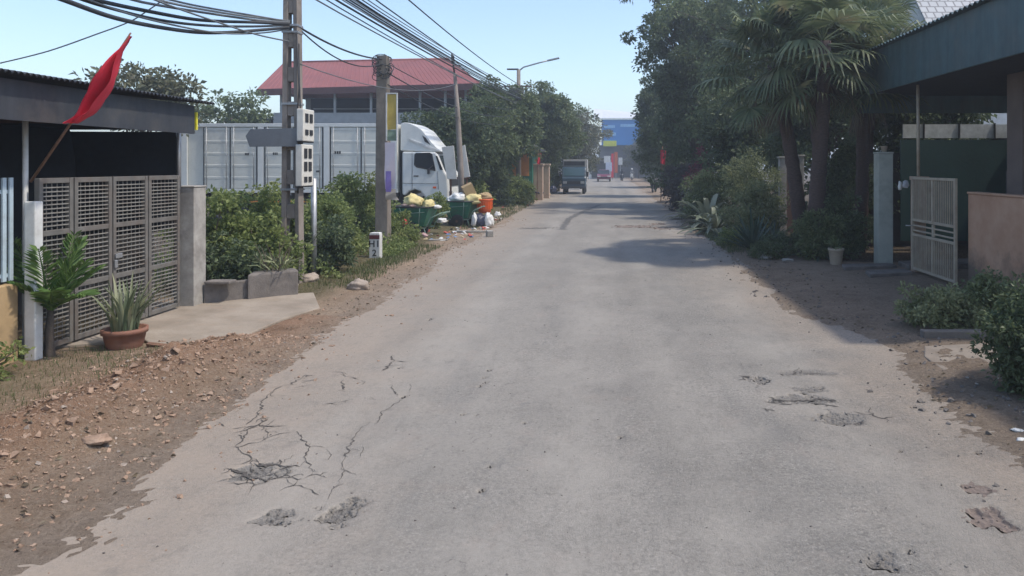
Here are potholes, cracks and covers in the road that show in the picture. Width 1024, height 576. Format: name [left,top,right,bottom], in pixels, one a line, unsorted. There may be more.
pothole [960,481,997,497]
pothole [811,409,869,427]
pothole [247,508,304,526]
pothole [220,462,292,487]
pothole [744,376,772,388]
crack [216,356,410,498]
pothole [765,393,840,405]
pothole [314,496,375,530]
pothole [789,386,828,394]
pothole [961,506,1021,533]
pothole [859,551,901,573]
